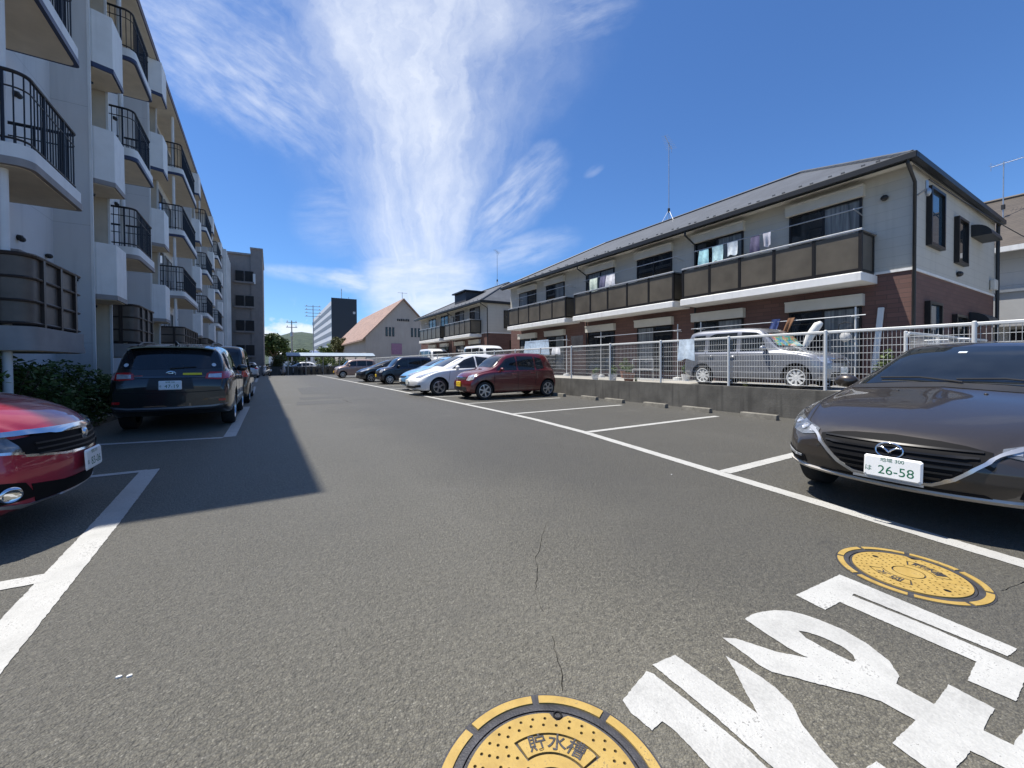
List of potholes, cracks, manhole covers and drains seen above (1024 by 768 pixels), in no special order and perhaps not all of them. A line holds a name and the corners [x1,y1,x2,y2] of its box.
manhole cover [439,694,663,768]
manhole cover [836,547,998,608]
